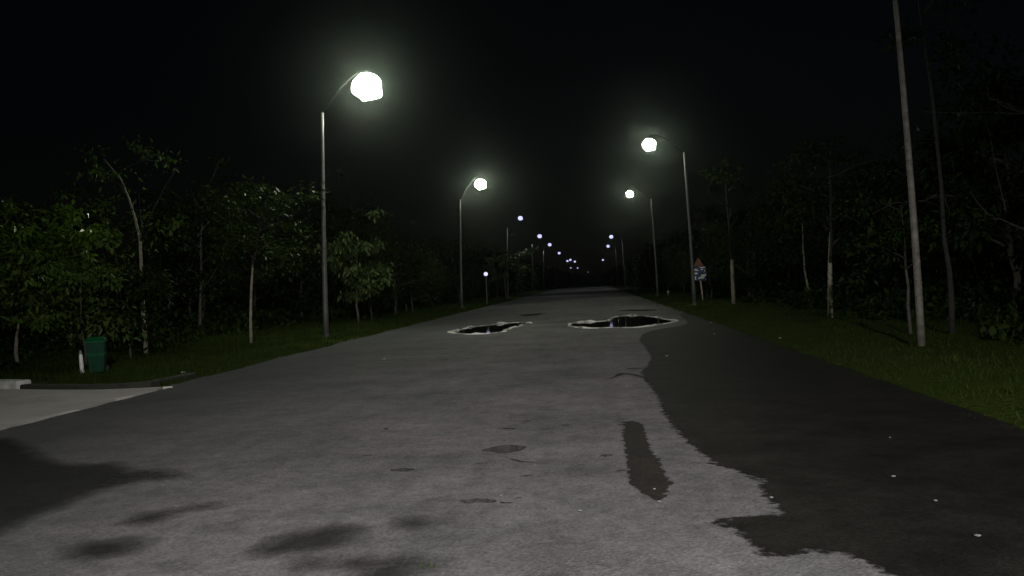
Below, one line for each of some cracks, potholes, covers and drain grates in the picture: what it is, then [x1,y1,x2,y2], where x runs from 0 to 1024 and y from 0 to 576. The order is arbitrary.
pothole [568,314,679,329]
pothole [448,322,533,335]
